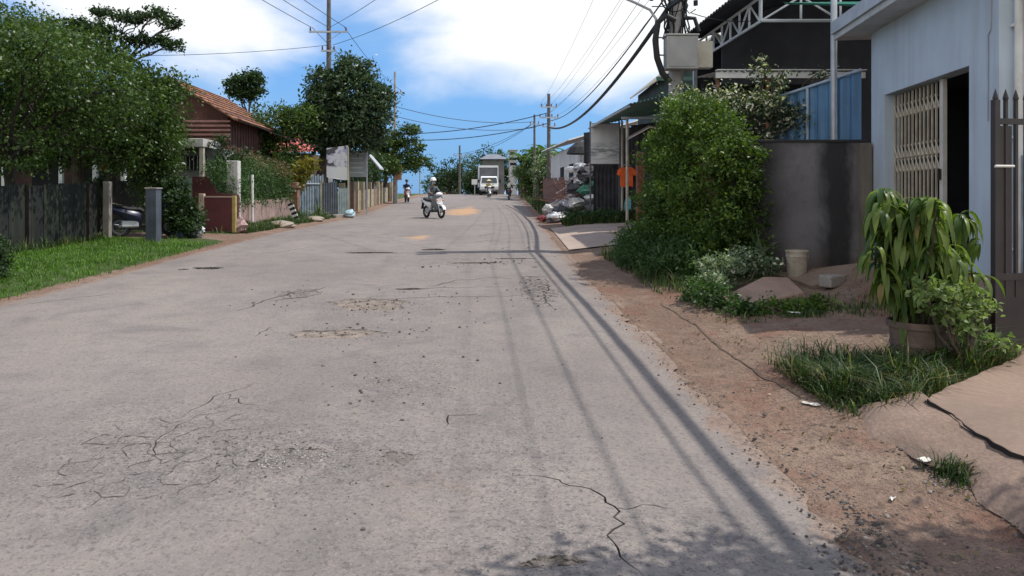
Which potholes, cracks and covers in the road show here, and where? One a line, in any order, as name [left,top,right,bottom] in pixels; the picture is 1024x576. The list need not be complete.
pothole [286,329,387,339]
pothole [327,298,410,311]
crack [515,475,673,575]
pothole [376,451,415,471]
crack [660,303,801,397]
crack [238,287,325,311]
pothole [249,448,333,470]
crack [46,385,261,506]
pothole [516,555,587,569]
